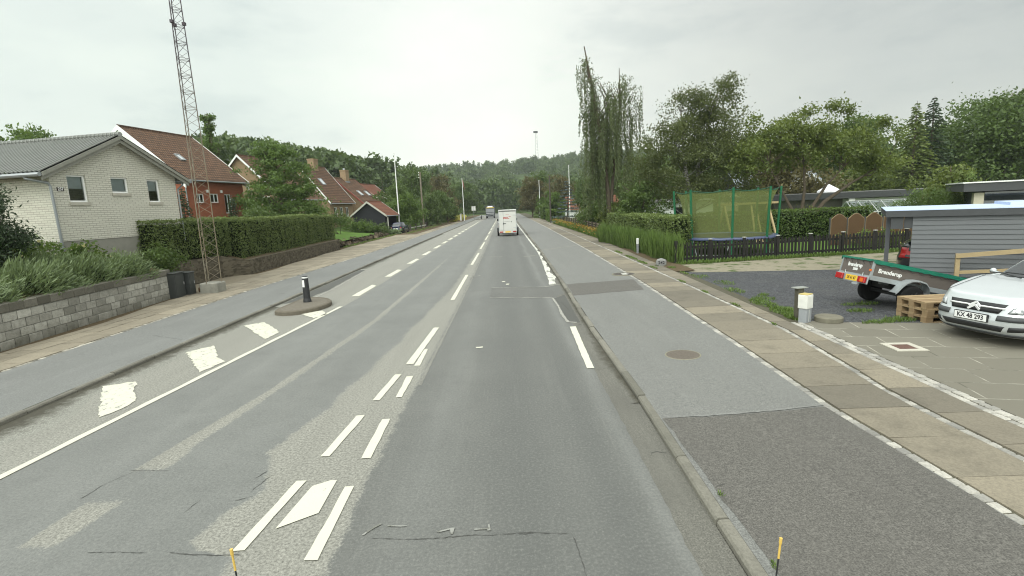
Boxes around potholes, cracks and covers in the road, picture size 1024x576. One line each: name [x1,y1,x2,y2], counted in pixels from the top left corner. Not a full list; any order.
manhole cover [665,350,701,360]
crack [373,531,586,574]
drain grate [879,342,930,352]
